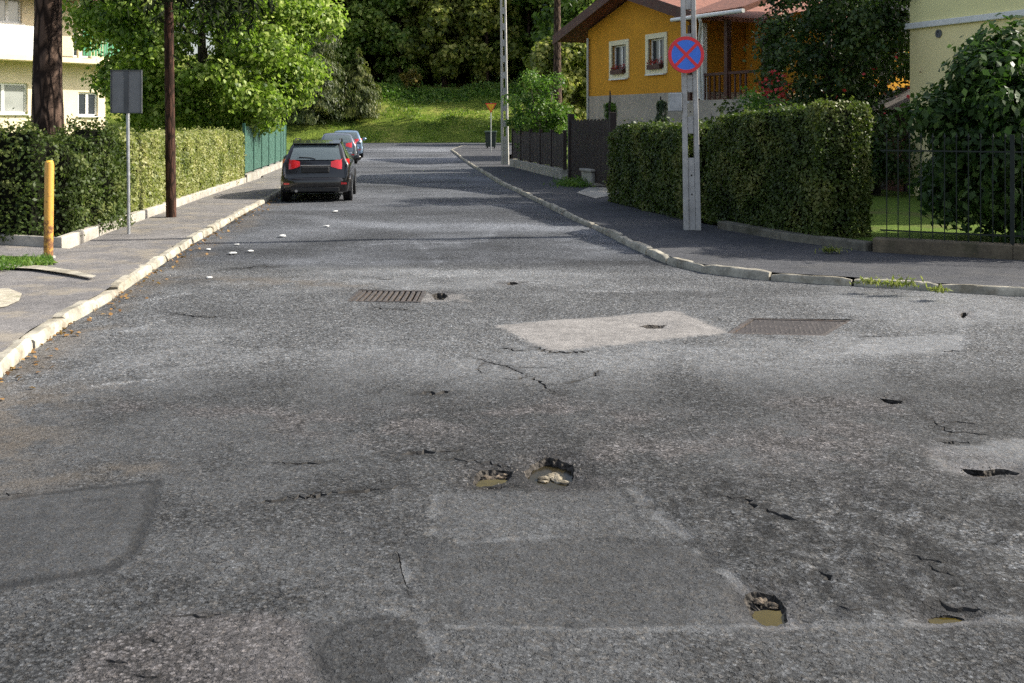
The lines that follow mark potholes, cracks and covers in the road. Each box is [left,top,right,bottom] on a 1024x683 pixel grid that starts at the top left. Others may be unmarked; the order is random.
pothole [927,615,966,624]
drain grate [348,290,426,303]
pothole [955,466,1023,480]
manhole cover [728,318,850,336]
pothole [744,592,788,626]
pothole [522,445,587,493]
pothole [873,395,908,405]
crack [724,496,798,521]
crack [475,347,599,397]
pothole [451,464,523,490]
crack [397,552,409,595]
crack [924,415,987,444]
